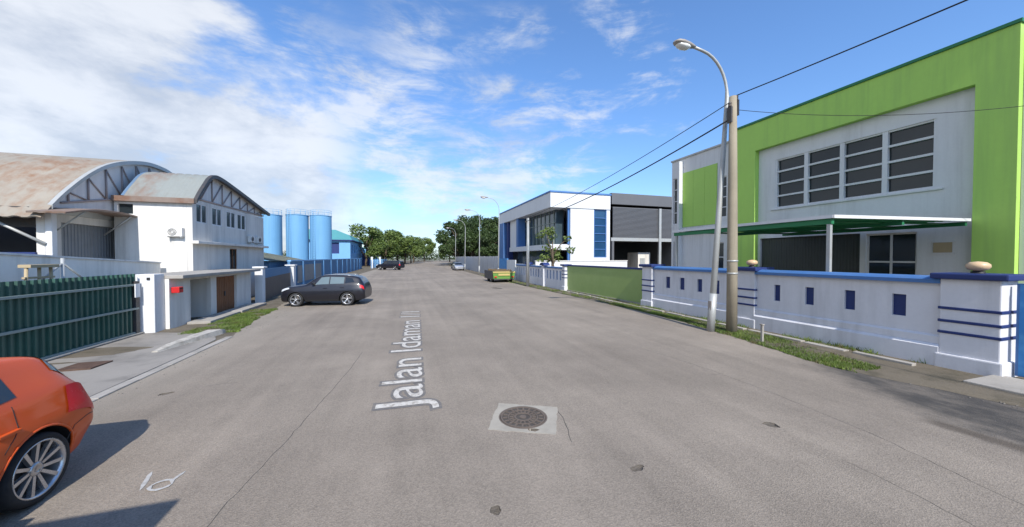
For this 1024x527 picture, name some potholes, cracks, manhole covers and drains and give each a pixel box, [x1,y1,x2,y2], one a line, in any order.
manhole cover [488,403,558,435]
